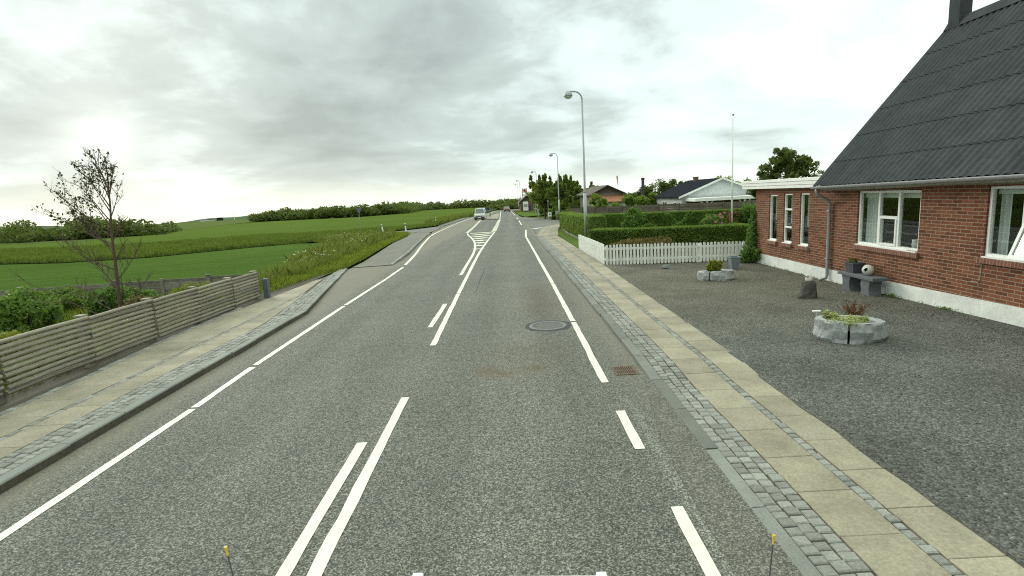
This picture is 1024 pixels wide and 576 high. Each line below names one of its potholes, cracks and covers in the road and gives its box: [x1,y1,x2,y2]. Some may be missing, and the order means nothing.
manhole cover [525,320,571,331]
drain grate [612,366,639,376]
